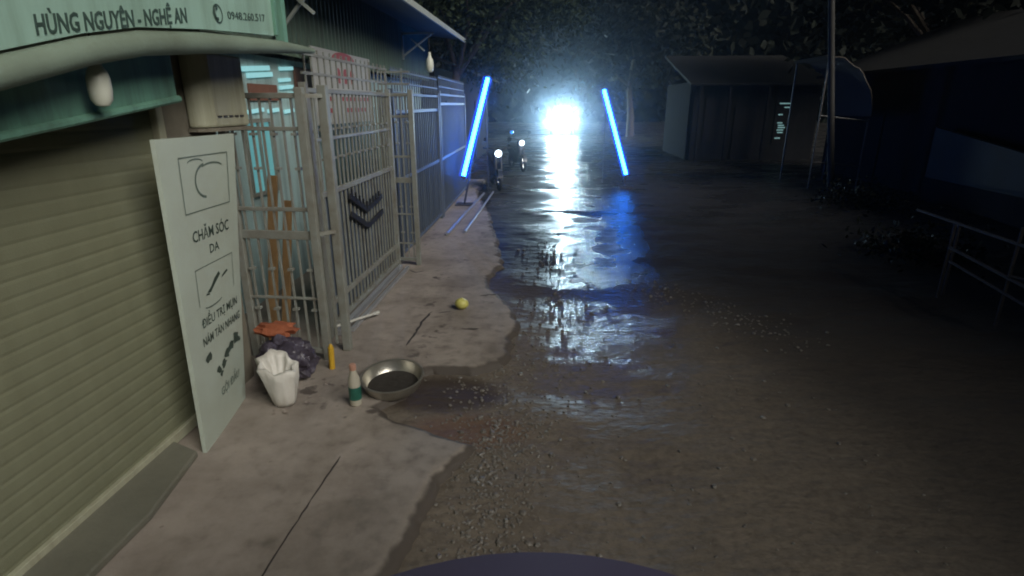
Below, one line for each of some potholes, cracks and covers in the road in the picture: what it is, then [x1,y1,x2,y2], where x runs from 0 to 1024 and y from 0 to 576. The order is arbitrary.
crack [262,457,340,576]
crack [406,311,450,345]
